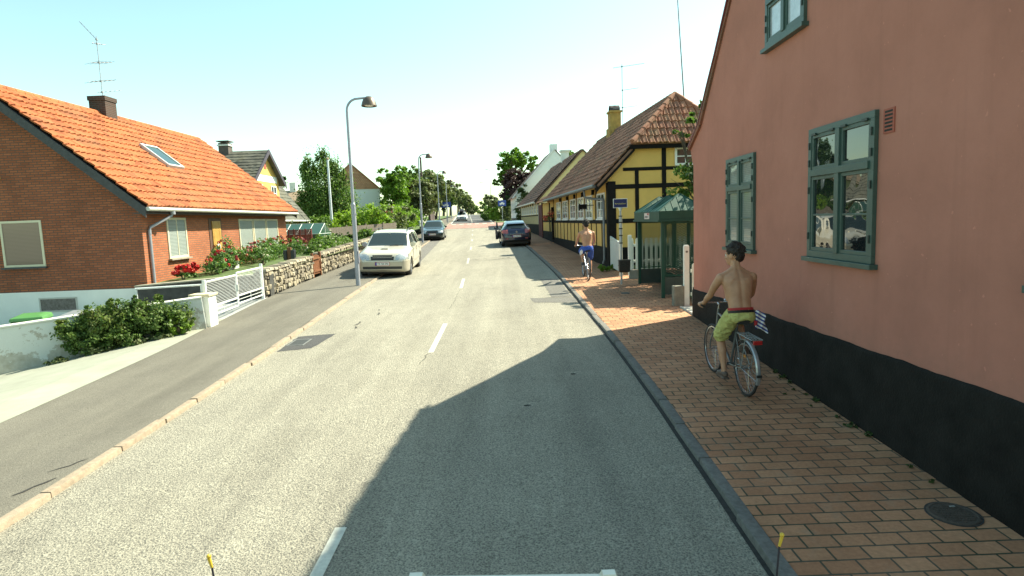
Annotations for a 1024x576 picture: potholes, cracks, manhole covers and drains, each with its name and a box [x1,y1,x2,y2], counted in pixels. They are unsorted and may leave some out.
crack [12,459,85,496]
manhole cover [924,502,984,527]
